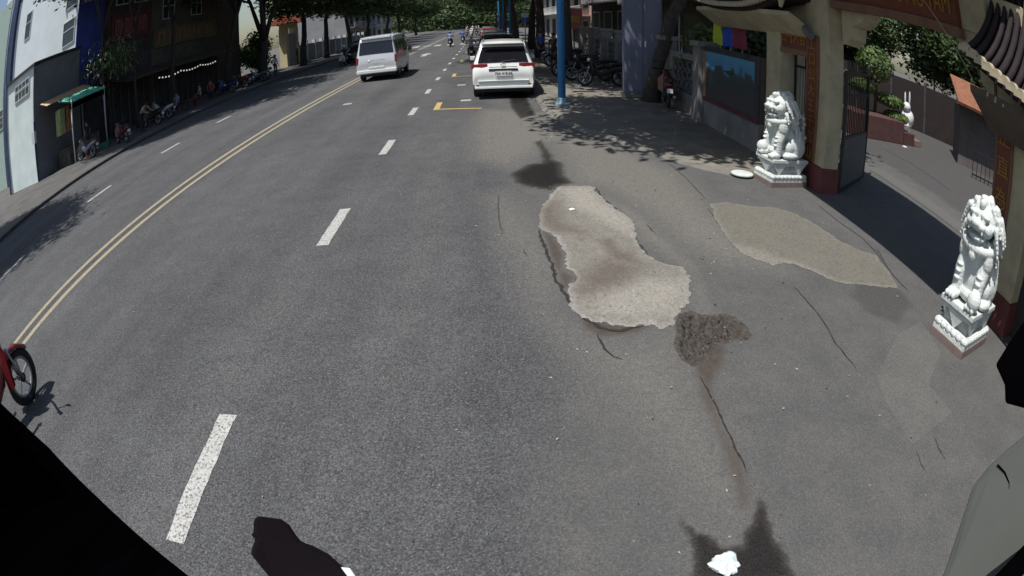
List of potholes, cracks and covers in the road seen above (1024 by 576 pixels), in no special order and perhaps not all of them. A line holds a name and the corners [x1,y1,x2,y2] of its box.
pothole [673,311,752,367]
crack [699,375,747,473]
crack [523,230,645,359]
